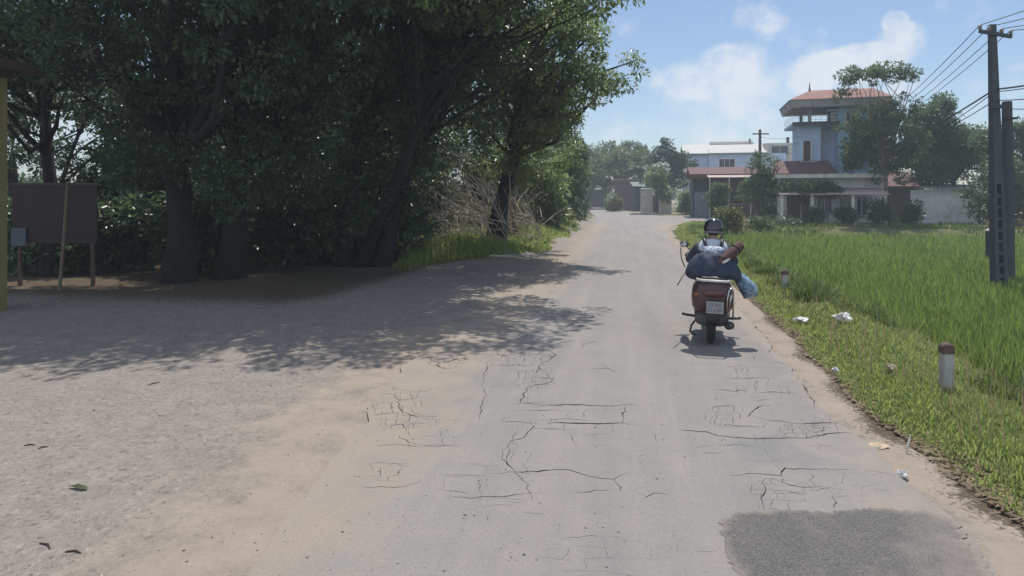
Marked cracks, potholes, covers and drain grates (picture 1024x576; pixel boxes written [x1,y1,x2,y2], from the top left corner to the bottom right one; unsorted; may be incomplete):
crack [372,355,463,447]
crack [684,326,838,454]
crack [743,468,883,509]
crack [456,341,633,519]
